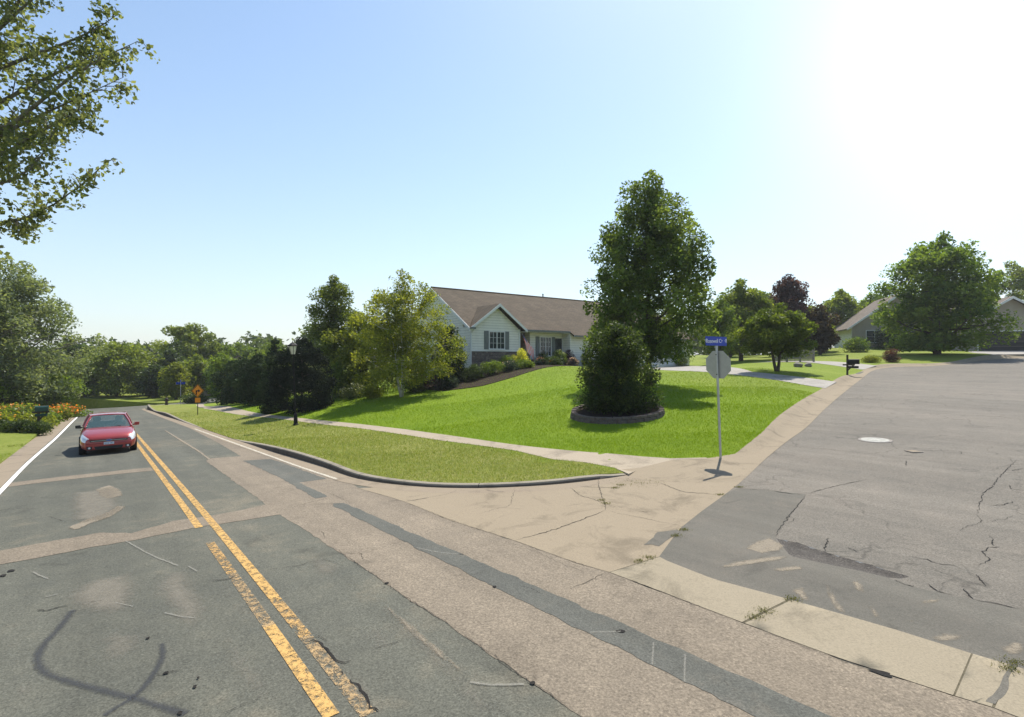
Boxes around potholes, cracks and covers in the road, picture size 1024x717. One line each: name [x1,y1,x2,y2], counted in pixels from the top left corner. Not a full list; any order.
crack [760,479,866,535]
crack [929,460,1017,608]
